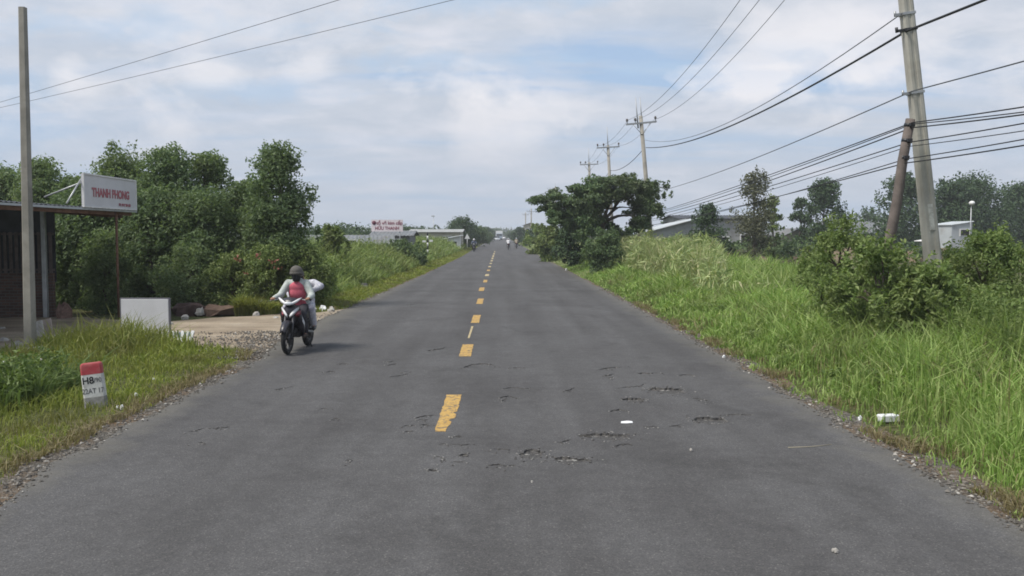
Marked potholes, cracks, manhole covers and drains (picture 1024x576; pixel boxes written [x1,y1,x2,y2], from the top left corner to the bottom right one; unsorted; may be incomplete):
pothole [638,386,696,396]
pothole [514,447,552,462]
pothole [541,456,604,465]
pothole [578,430,647,442]
pothole [686,415,730,424]
